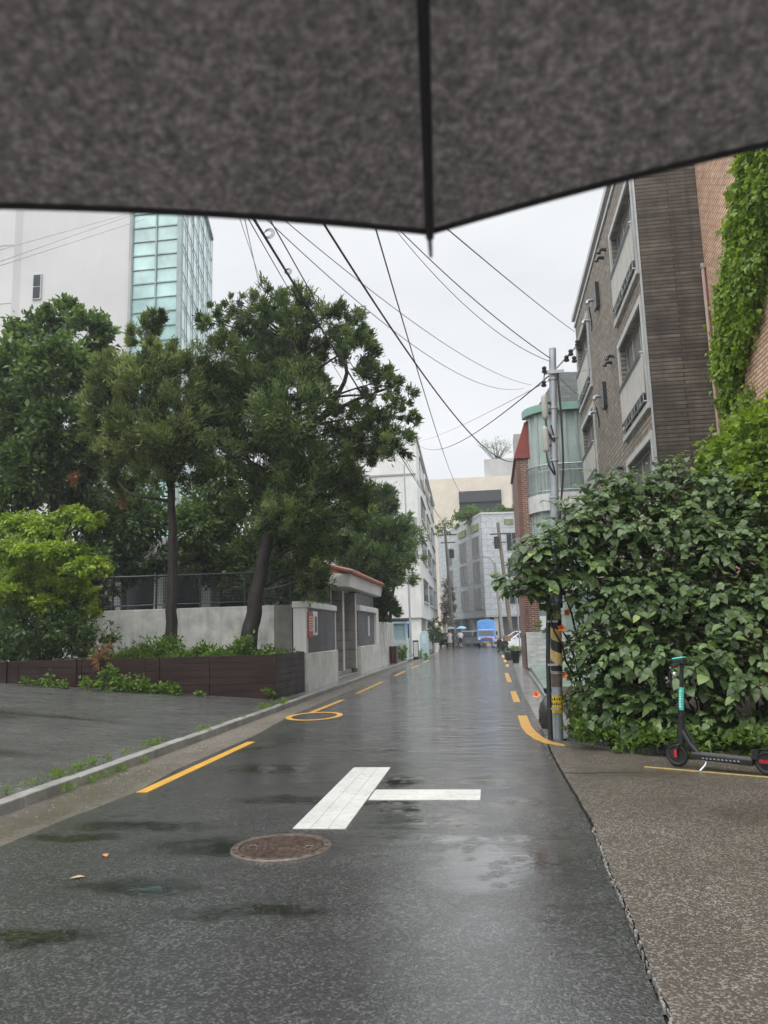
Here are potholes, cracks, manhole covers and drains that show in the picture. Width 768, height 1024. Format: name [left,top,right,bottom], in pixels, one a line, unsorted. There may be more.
manhole cover [230,833,332,863]
